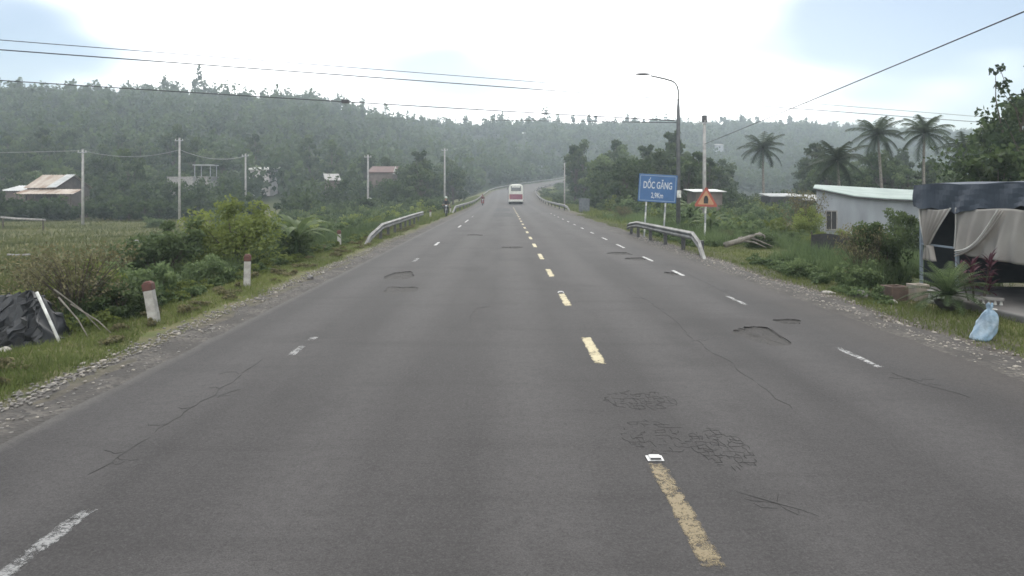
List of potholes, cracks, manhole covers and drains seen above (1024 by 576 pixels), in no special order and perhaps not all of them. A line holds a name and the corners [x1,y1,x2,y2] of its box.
pothole [733,326,791,346]
crack [88,360,261,475]
crack [739,492,818,516]
crack [604,390,757,471]
crack [627,287,793,409]
pothole [384,271,414,279]
